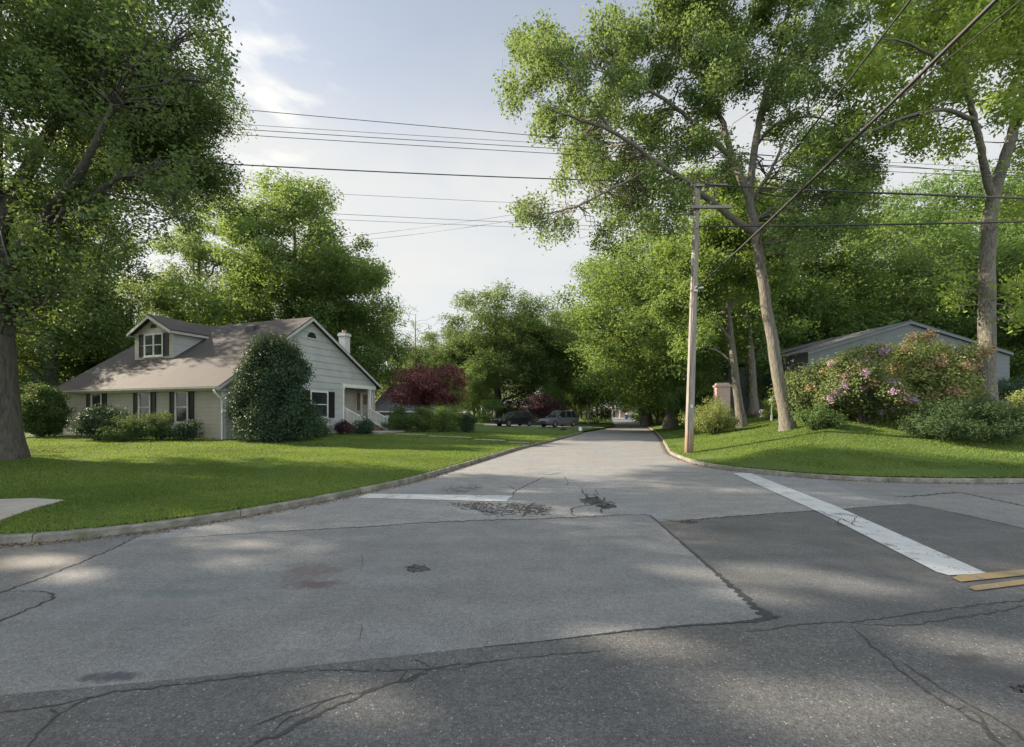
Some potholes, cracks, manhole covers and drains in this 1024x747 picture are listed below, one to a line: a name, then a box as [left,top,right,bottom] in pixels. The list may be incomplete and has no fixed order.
crack [856,605,1024,747]
crack [0,648,623,747]
pothole [405,564,431,573]
crack [138,473,641,541]
